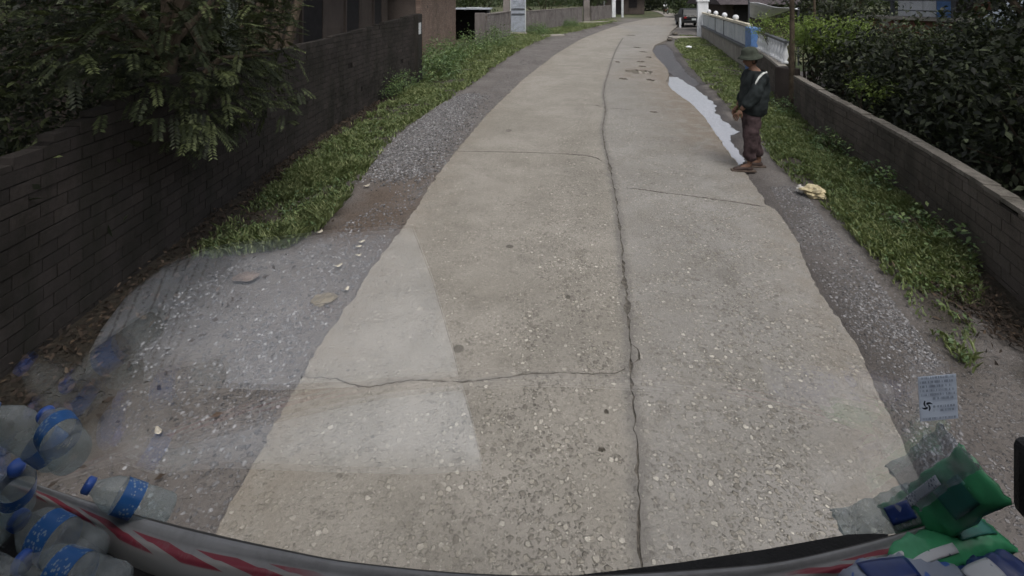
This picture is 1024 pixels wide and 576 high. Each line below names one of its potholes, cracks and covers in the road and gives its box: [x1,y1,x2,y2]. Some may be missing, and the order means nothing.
crack [630,188,765,207]
crack [300,346,640,388]
